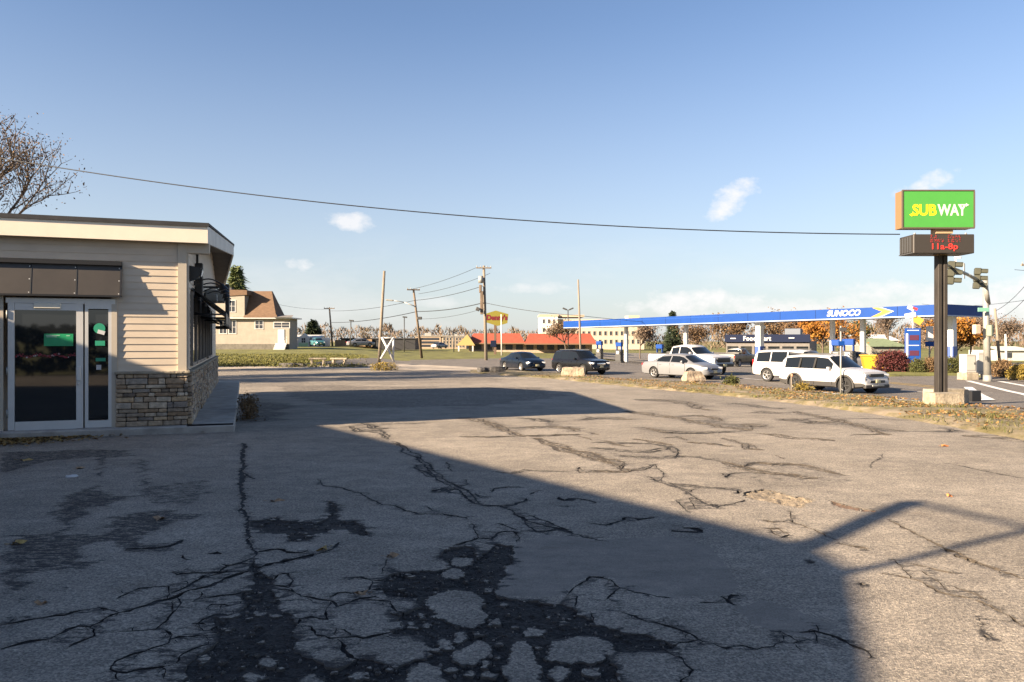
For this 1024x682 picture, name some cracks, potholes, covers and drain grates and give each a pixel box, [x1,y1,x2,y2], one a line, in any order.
crack [320,399,903,545]
crack [567,576,872,682]
pothole [743,489,816,508]
crack [1,540,405,682]
